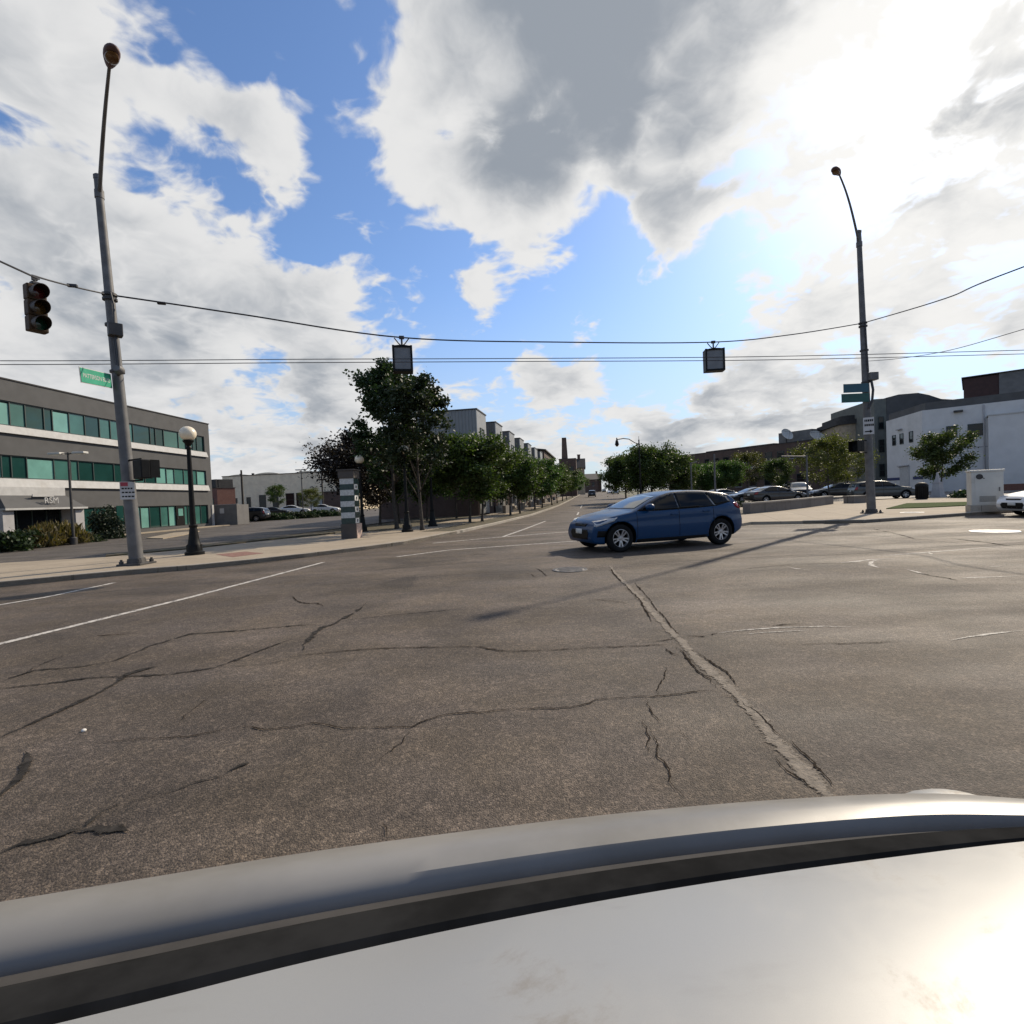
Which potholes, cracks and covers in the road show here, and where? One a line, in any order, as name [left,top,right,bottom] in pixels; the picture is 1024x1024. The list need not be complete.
crack [3,596,889,795]
crack [0,761,251,853]
